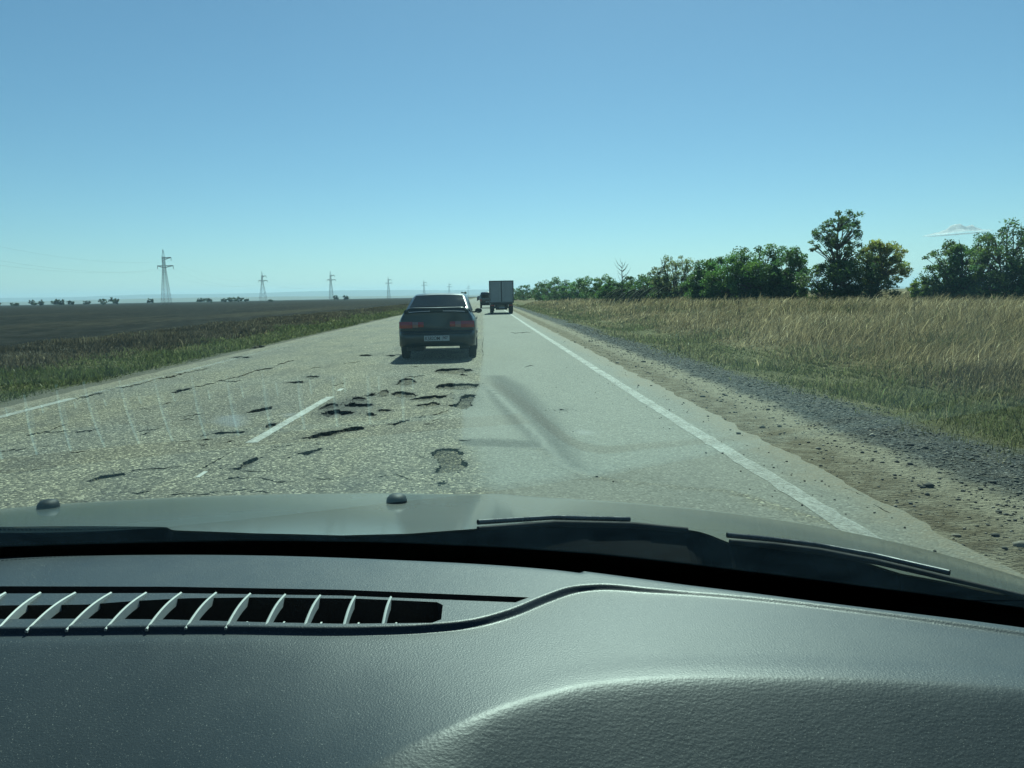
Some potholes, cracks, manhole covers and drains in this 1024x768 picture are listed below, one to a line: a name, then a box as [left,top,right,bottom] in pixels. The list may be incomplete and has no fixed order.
pothole [233,457,258,470]
pothole [448,394,476,409]
crack [140,400,285,495]
crack [0,424,96,452]
pothole [322,409,353,417]
pothole [87,473,126,482]
pothole [303,426,364,439]
pothole [431,448,469,473]
crack [78,345,319,399]
